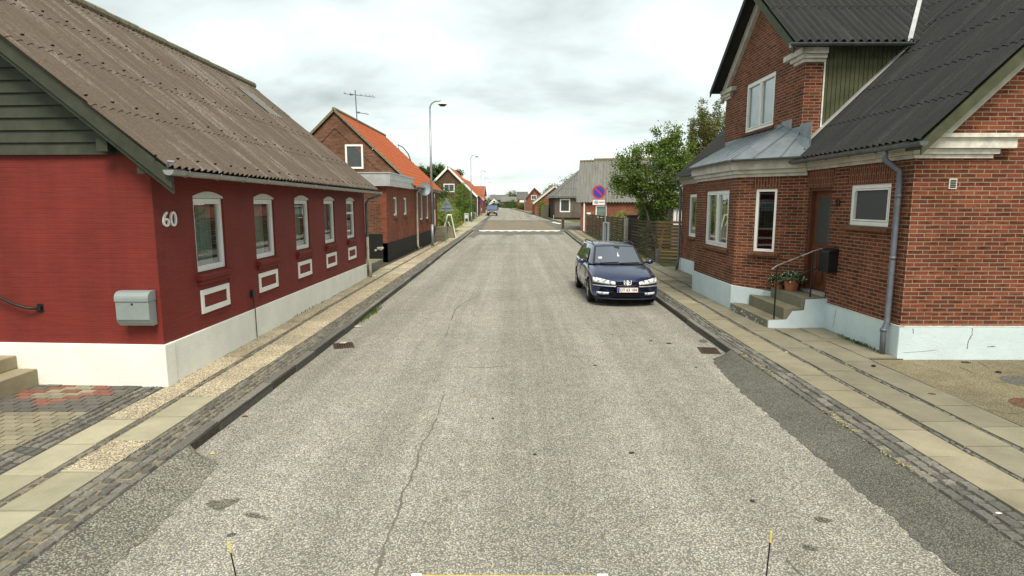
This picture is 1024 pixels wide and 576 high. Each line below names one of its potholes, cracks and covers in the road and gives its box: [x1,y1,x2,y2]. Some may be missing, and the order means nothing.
crack [374,391,444,576]
